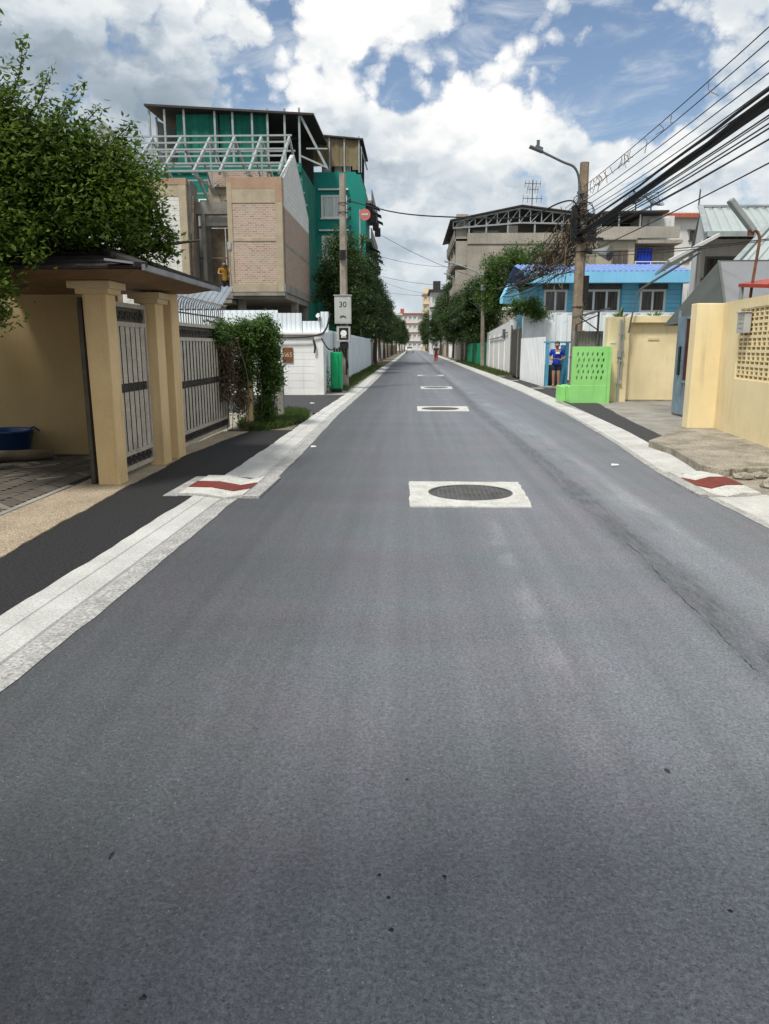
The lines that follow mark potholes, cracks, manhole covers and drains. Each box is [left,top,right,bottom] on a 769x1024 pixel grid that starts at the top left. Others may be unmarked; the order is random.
manhole cover [409,481,532,508]
crack [623,540,757,671]
